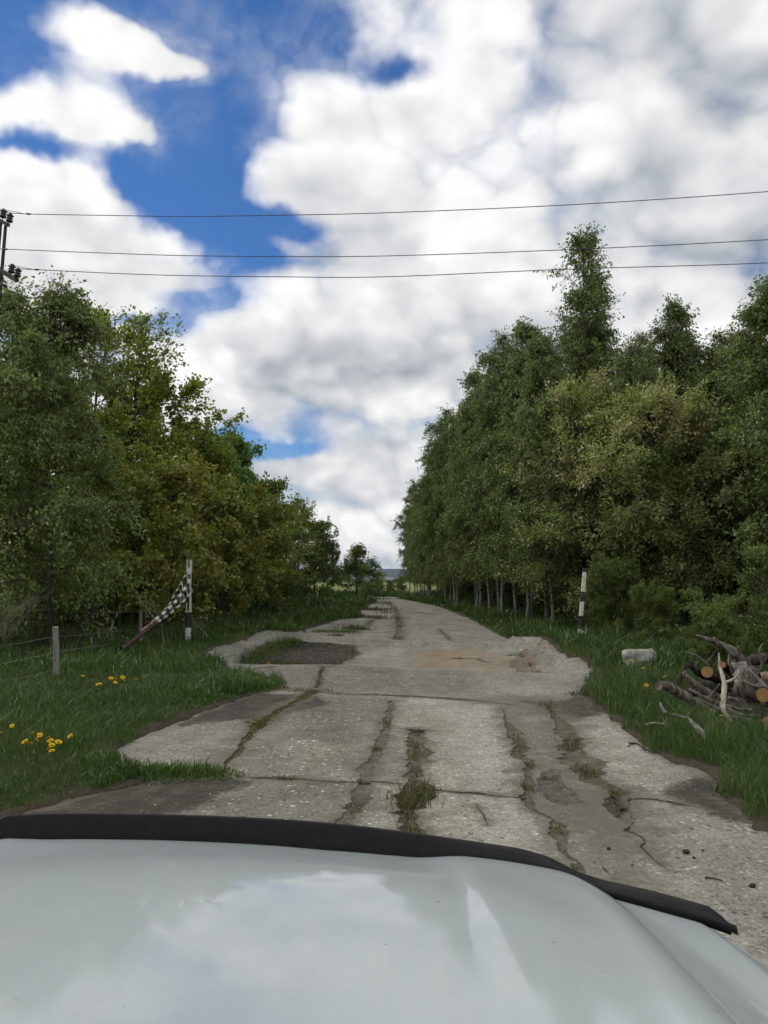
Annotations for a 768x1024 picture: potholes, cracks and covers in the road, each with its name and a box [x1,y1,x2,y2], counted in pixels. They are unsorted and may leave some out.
pothole [238,641,357,665]
crack [367,601,405,640]
crack [390,729,436,834]
pothole [508,649,546,673]
crack [224,665,334,765]
crack [476,704,670,874]
